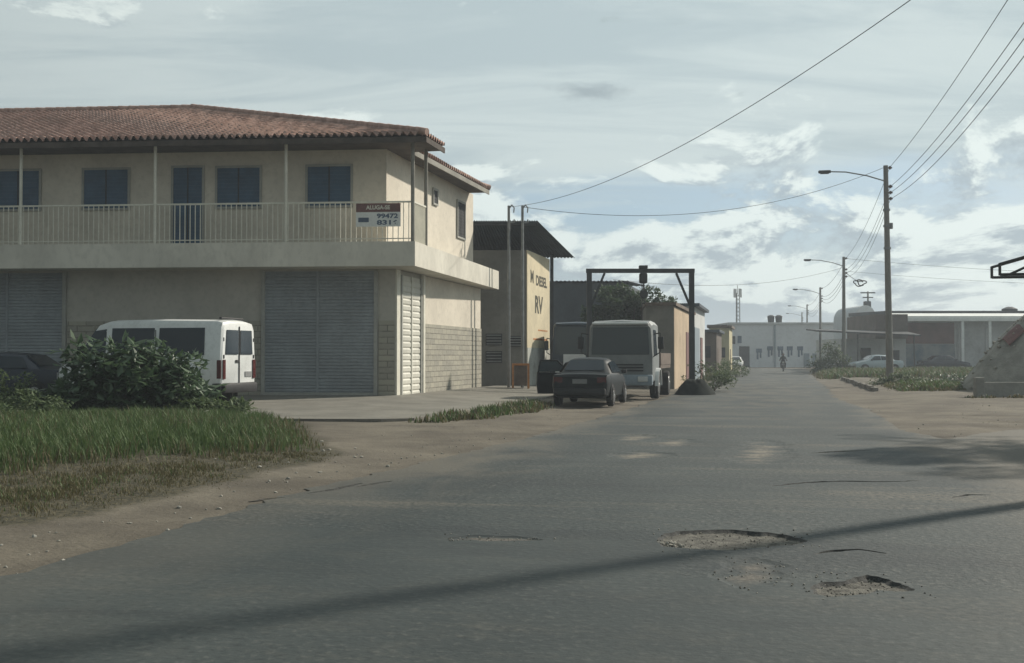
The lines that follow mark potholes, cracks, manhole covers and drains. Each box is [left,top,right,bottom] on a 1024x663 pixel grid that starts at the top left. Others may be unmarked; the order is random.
crack [305,481,391,494]
pothole [443,533,556,542]
pothole [690,556,826,594]
pothole [791,571,936,600]
pothole [653,528,820,552]
